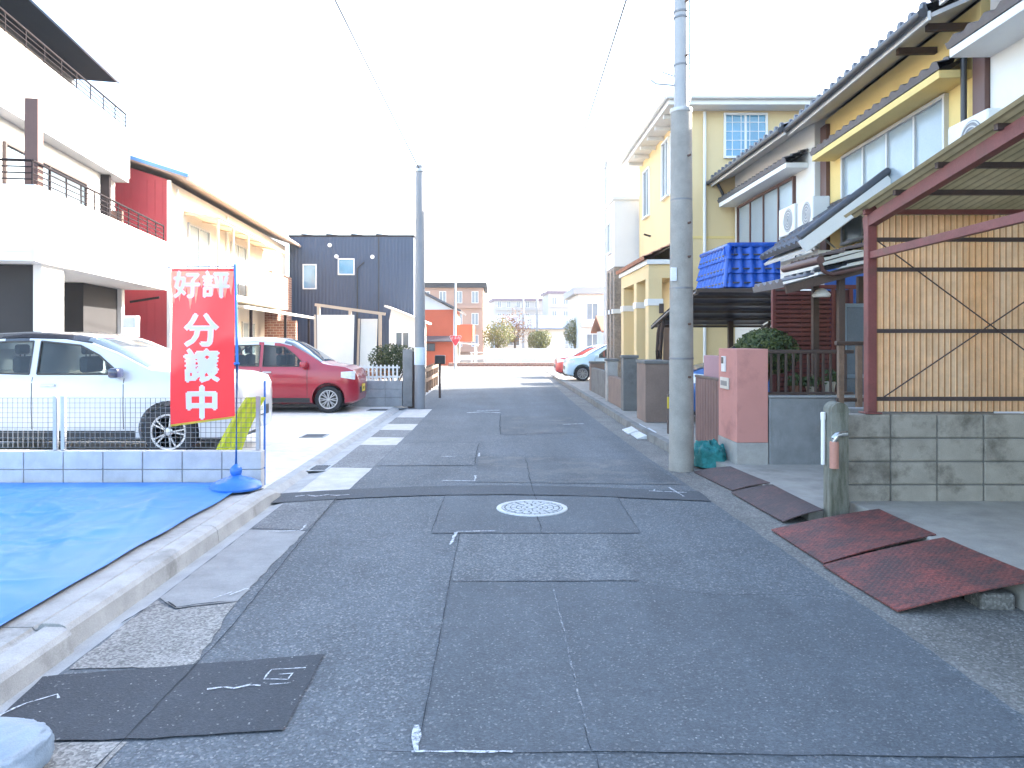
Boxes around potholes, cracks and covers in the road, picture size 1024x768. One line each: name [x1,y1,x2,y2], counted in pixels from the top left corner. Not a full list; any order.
manhole cover [496,500,568,517]
